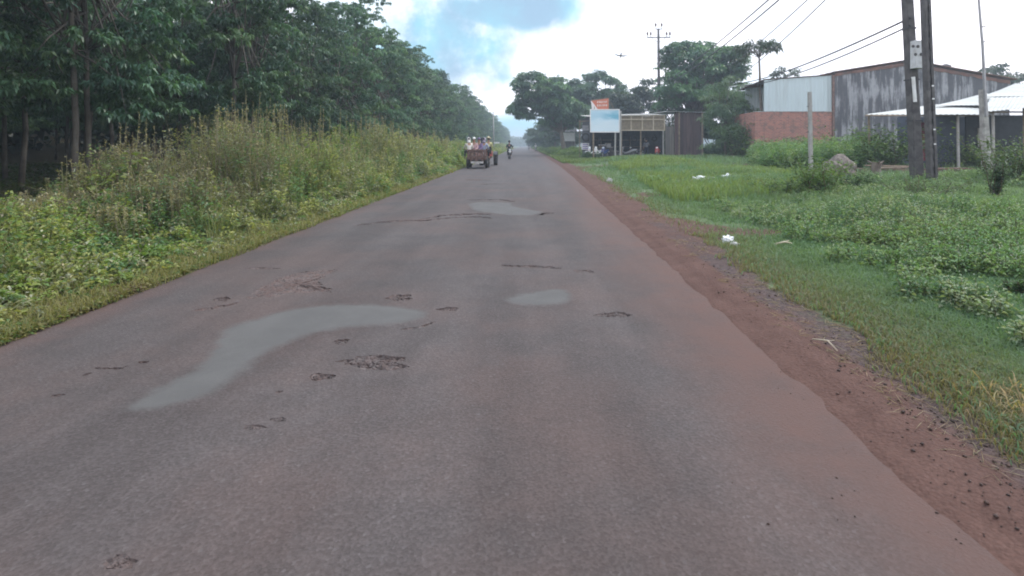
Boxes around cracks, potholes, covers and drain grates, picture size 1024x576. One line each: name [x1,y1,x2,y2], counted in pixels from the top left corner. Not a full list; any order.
pothole [333,354,410,371]
pothole [102,554,138,569]
pothole [308,373,336,381]
pothole [246,269,340,300]
